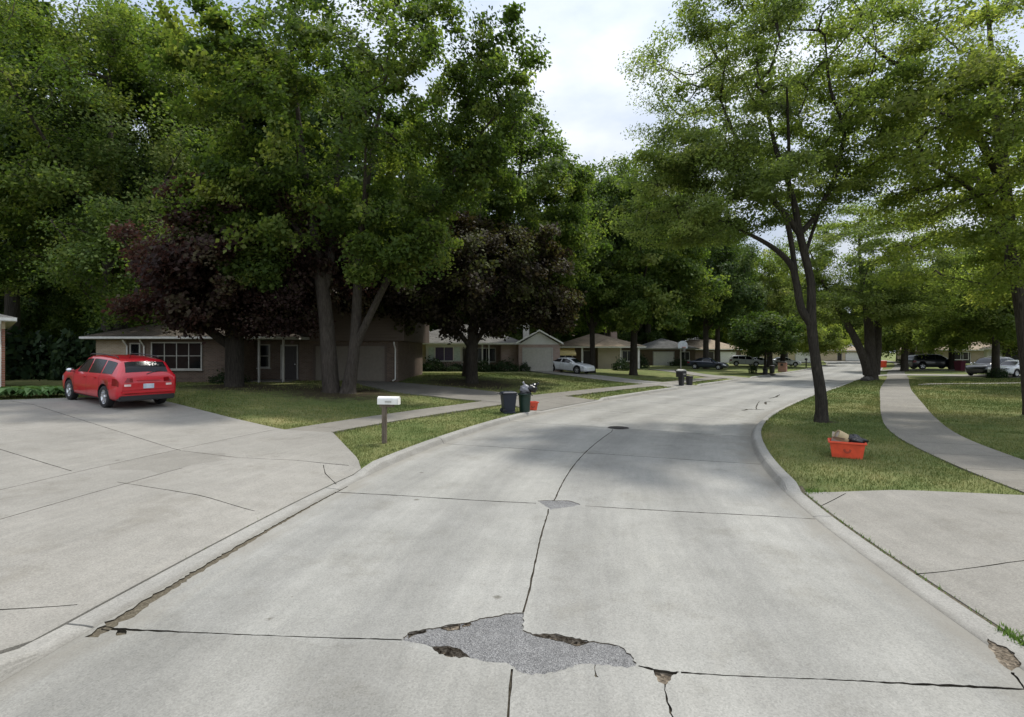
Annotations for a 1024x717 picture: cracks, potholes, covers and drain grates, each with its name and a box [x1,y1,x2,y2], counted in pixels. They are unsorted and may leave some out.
pothole [653,669,678,687]
crack [664,684,673,717]
crack [85,486,348,637]
pothole [987,639,1021,671]
